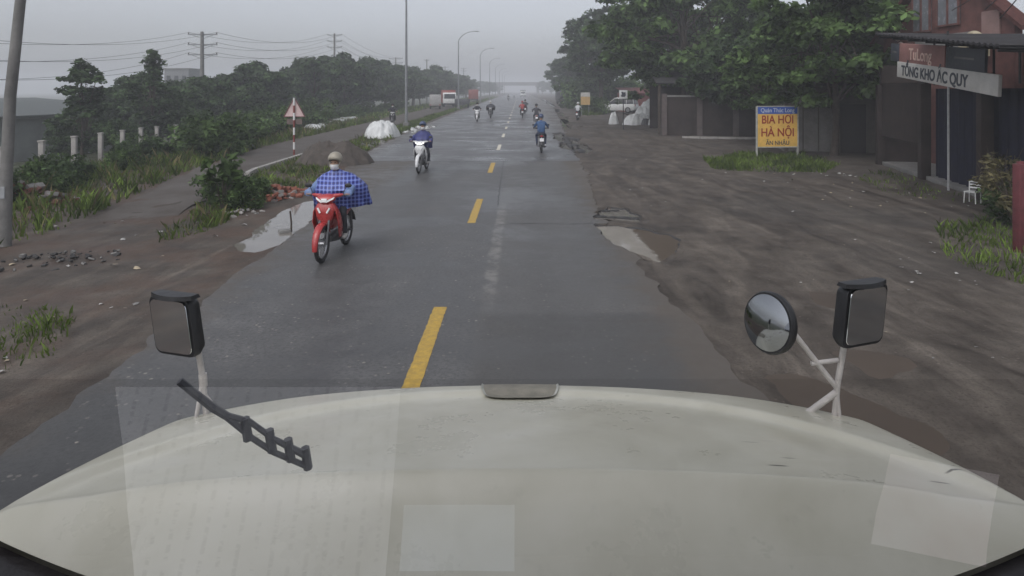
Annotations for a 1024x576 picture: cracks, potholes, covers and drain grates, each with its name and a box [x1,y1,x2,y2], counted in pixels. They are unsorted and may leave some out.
pothole [552,132,598,155]
pothole [593,206,643,223]
pothole [592,224,686,263]
